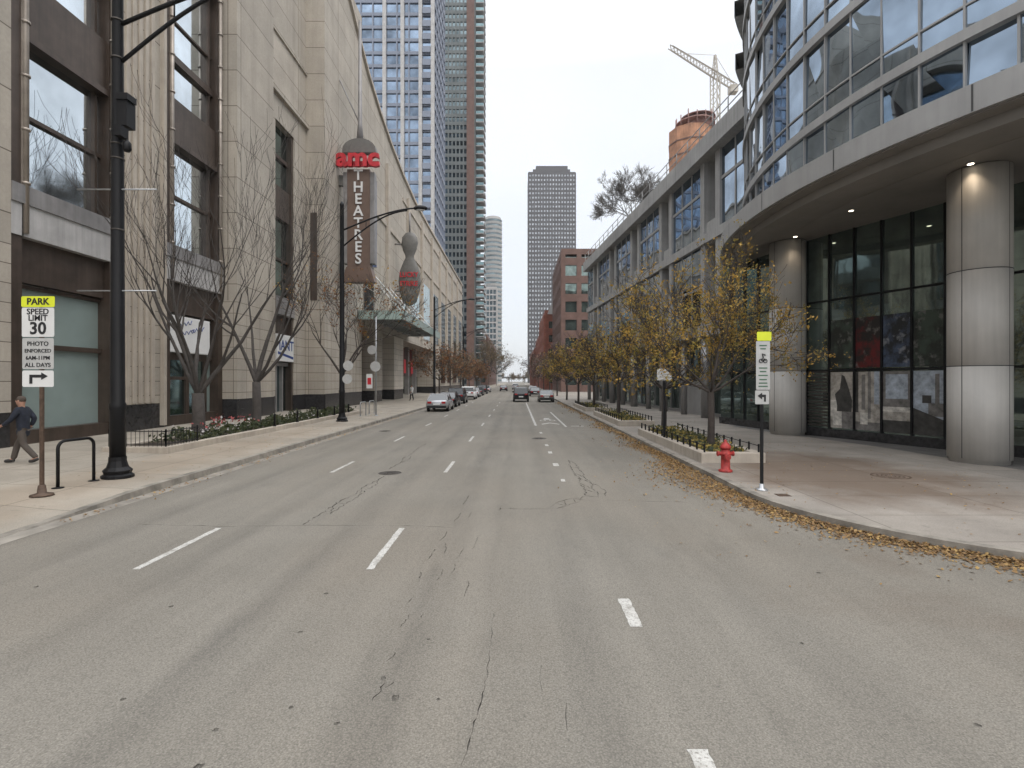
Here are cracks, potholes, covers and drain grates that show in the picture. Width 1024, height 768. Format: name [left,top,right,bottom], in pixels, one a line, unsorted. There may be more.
crack [552,460,664,509]
crack [146,444,478,701]
crack [460,619,493,767]
